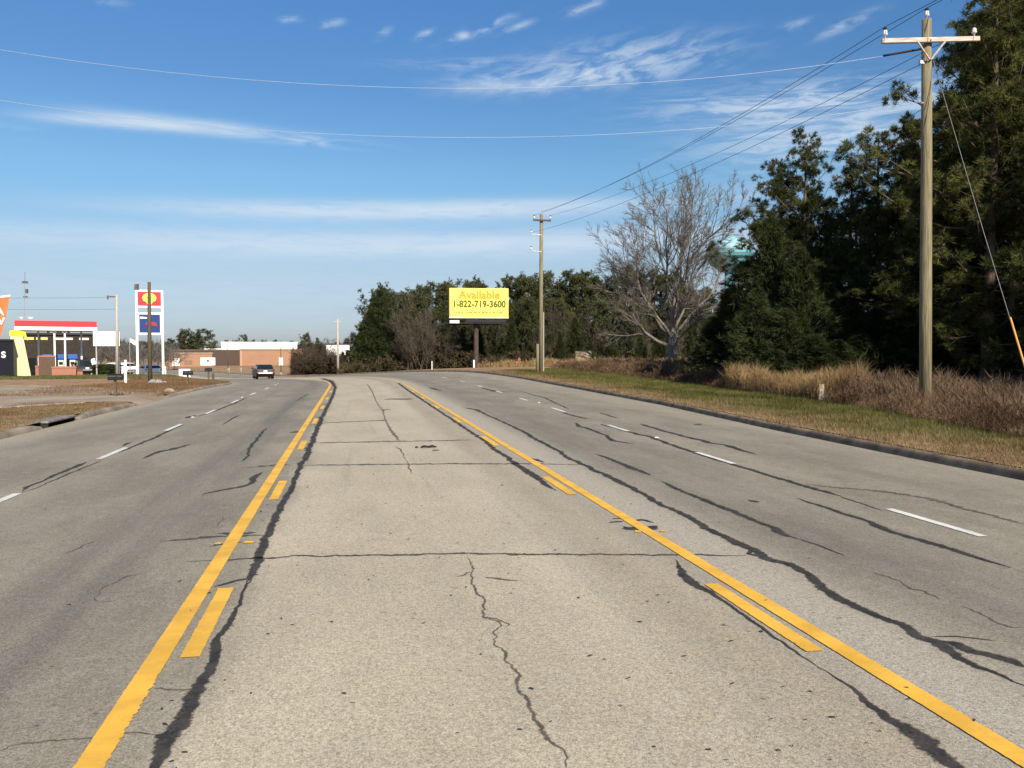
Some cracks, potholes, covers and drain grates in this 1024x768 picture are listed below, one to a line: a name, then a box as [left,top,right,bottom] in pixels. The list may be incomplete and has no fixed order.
crack [22,461,100,493]
crack [202,385,576,495]
crack [483,388,1022,628]
crack [167,517,742,768]
crack [121,425,190,459]
drain grate [29,415,76,429]
